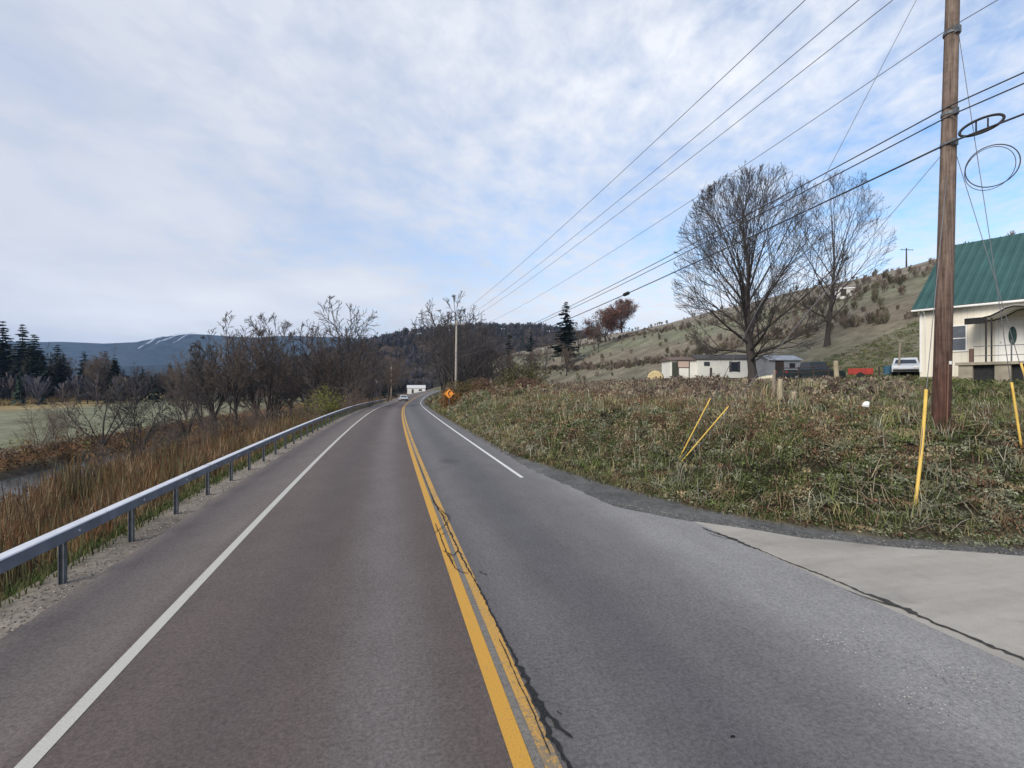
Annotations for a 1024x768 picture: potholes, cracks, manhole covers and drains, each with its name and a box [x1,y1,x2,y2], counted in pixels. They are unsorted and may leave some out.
crack [417,459,573,768]
